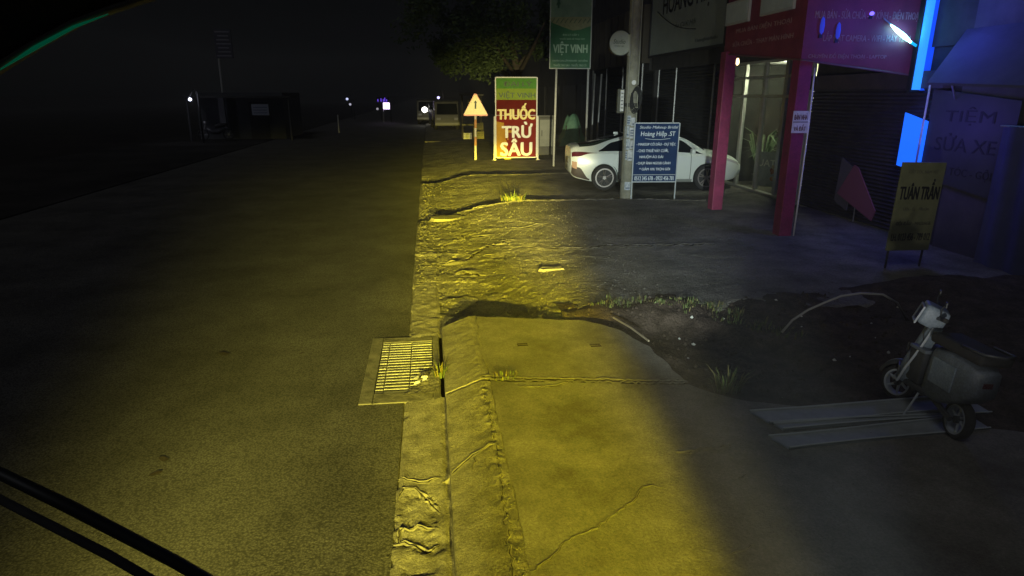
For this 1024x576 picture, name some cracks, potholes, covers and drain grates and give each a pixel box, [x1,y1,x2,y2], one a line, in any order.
drain grate [358,335,441,405]
crack [393,385,657,576]
crack [451,198,708,215]
